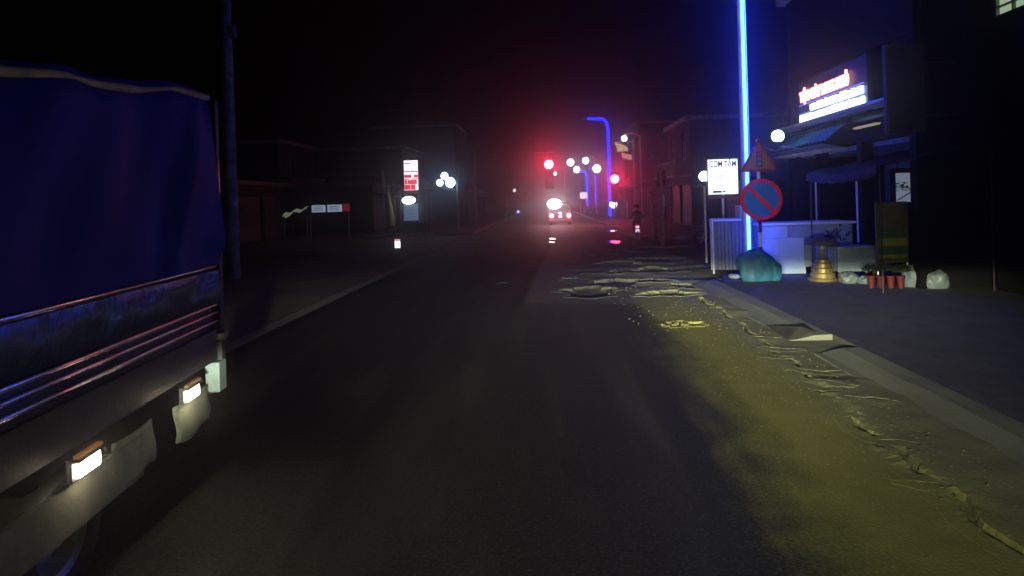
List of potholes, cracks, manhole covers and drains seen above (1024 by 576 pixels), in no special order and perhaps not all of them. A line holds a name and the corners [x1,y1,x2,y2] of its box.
crack [690,296,1024,576]
pothole [588,278,681,286]
pothole [551,285,623,299]
pothole [657,319,711,328]
pothole [630,289,707,297]
